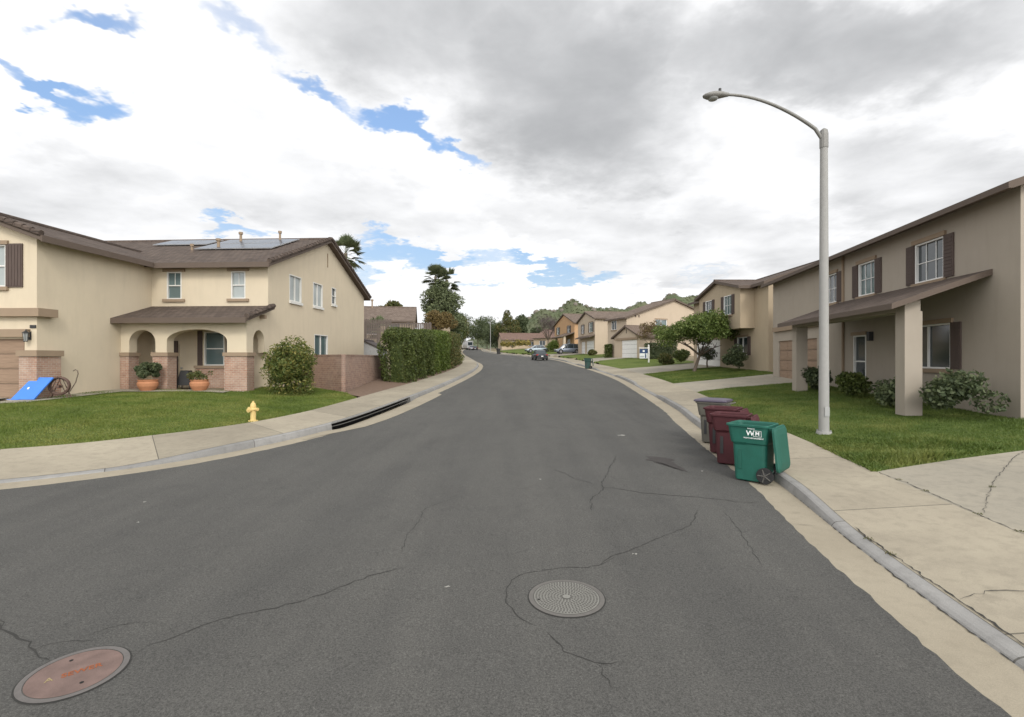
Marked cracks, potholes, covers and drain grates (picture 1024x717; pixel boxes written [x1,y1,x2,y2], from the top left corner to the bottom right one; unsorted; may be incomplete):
manhole cover [11,646,132,705]
drain grate [301,393,442,440]
manhole cover [528,579,606,618]
crack [135,569,395,655]
crack [0,620,146,660]
crack [547,632,624,688]
crack [505,456,760,626]
